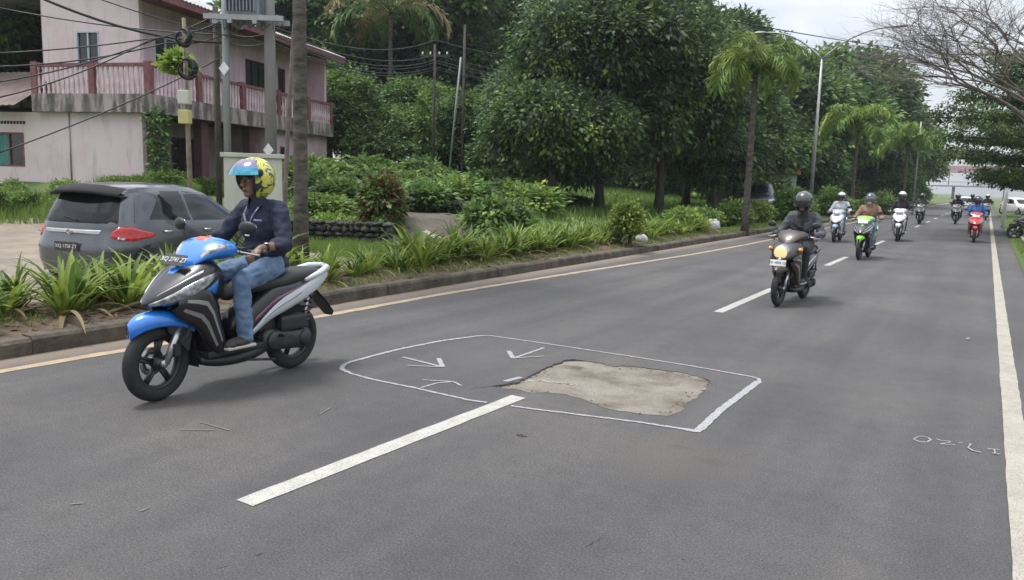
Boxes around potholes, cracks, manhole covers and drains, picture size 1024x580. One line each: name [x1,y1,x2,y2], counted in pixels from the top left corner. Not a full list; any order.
pothole [492,359,712,416]
